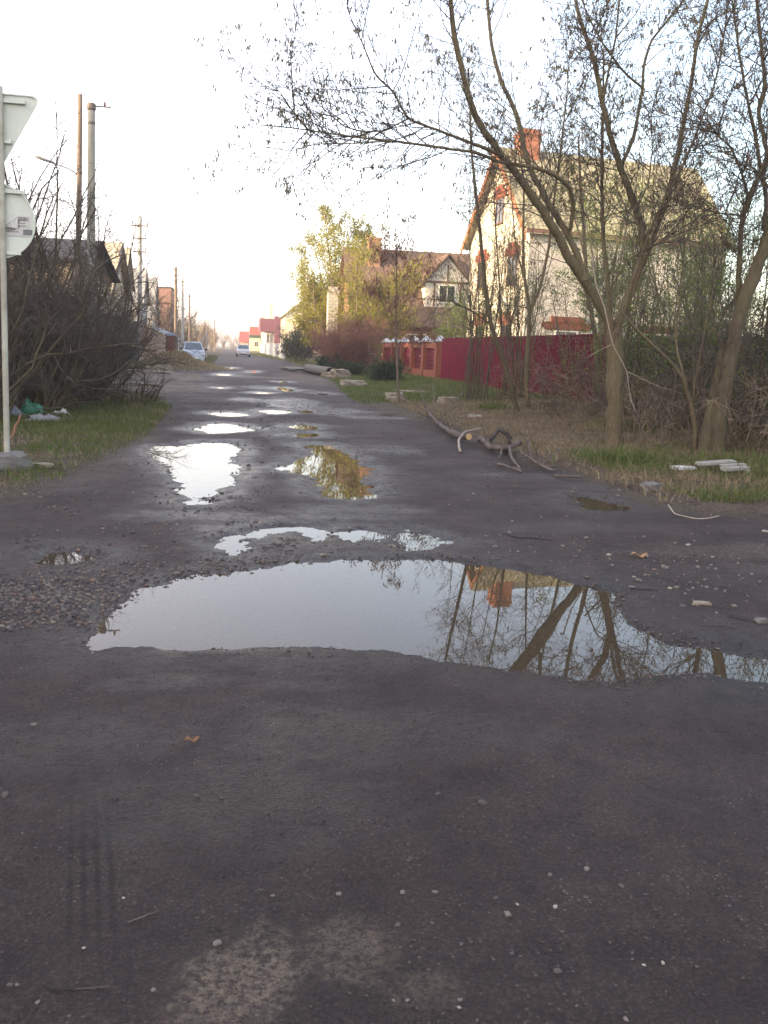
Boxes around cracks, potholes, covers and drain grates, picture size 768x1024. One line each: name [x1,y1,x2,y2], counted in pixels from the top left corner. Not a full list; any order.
pothole [188,423,262,434]
pothole [62,555,768,687]
pothole [566,494,642,512]
pothole [204,523,341,557]
pothole [139,440,250,499]
pothole [334,527,388,543]
pothole [384,527,464,552]
pothole [172,497,220,505]
pothole [270,443,385,501]
pothole [23,547,107,565]
